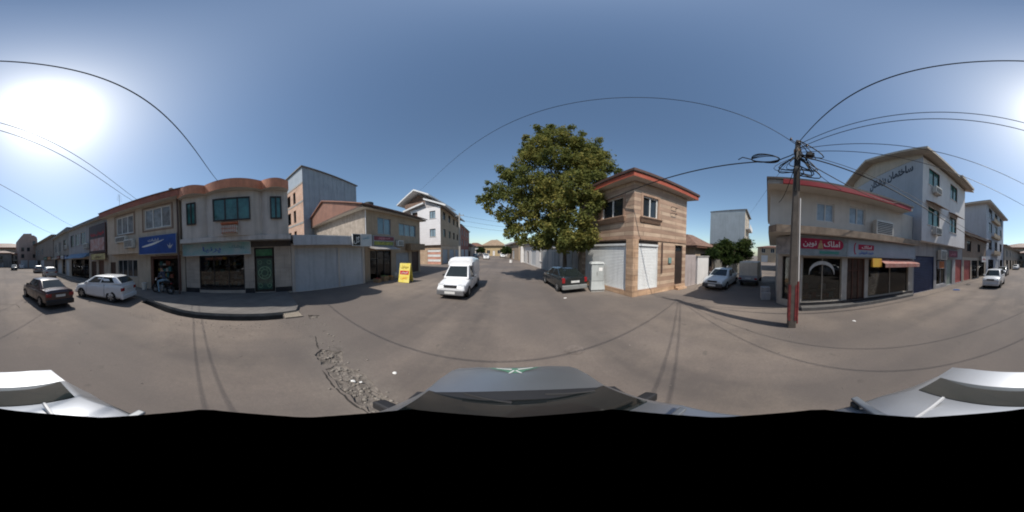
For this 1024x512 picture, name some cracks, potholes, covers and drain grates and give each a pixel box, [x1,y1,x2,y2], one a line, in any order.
pothole [326,364,389,413]
pothole [315,349,343,365]
